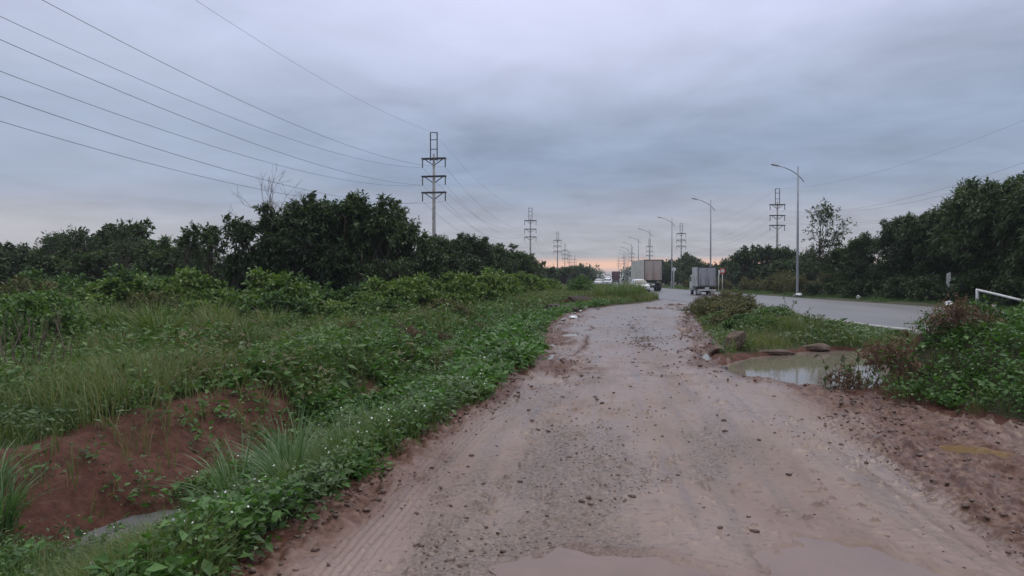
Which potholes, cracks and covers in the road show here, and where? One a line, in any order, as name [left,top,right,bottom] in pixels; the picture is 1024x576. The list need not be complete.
pothole [723,527,995,576]
pothole [460,536,772,576]
